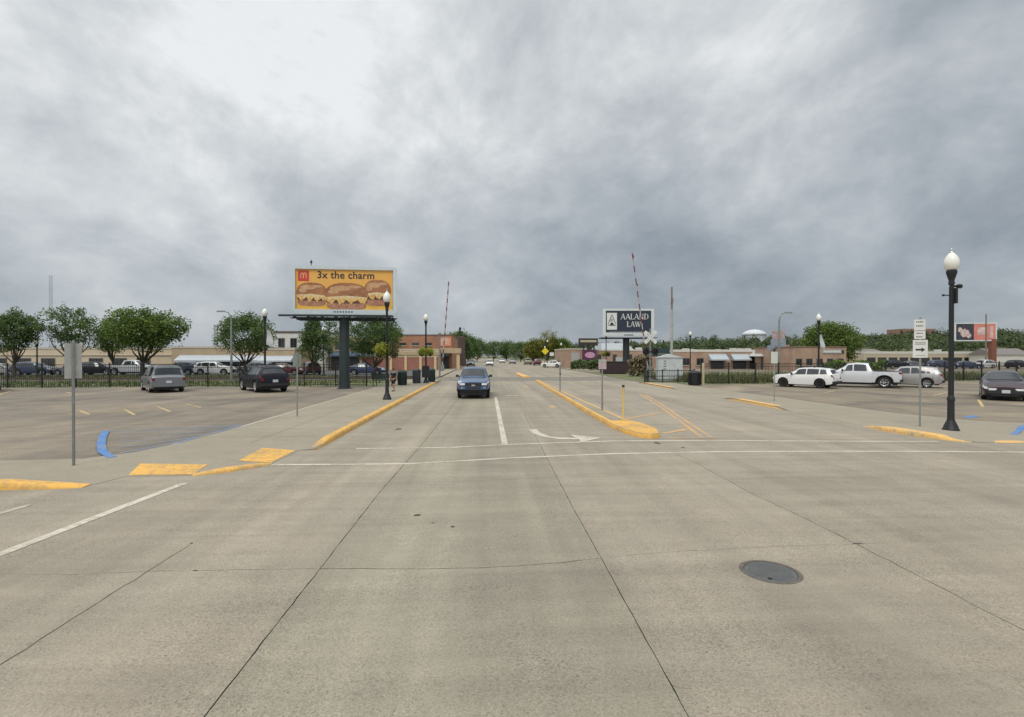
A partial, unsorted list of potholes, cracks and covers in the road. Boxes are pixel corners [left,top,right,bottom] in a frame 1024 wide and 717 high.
manhole cover [739,560,804,585]
